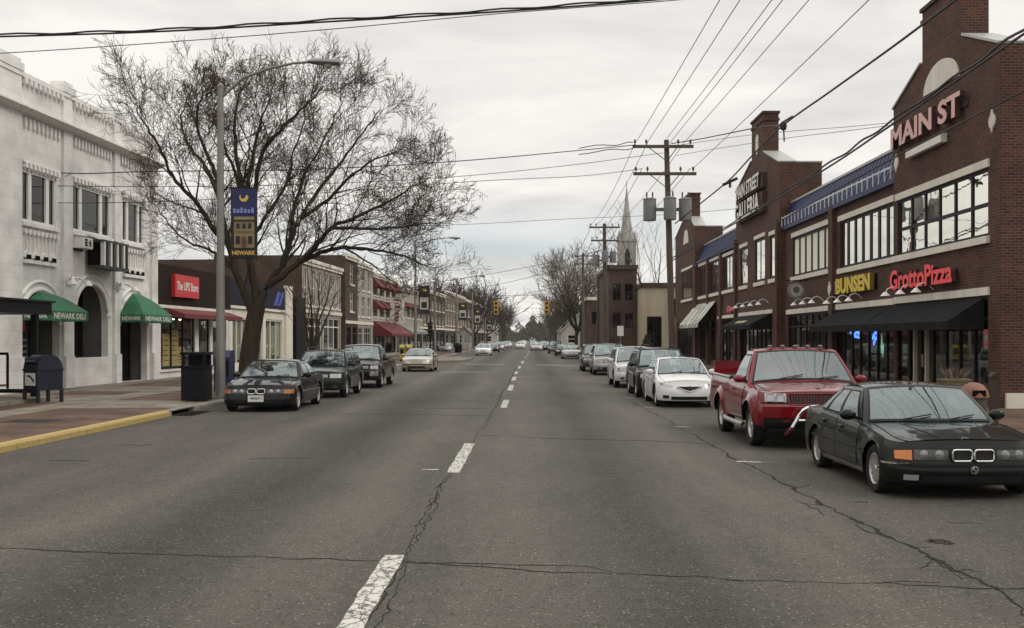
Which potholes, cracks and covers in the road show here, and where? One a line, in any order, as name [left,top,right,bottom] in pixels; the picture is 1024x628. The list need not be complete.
crack [0,401,1024,615]
drain grate [163,405,211,416]
crack [367,375,513,627]
